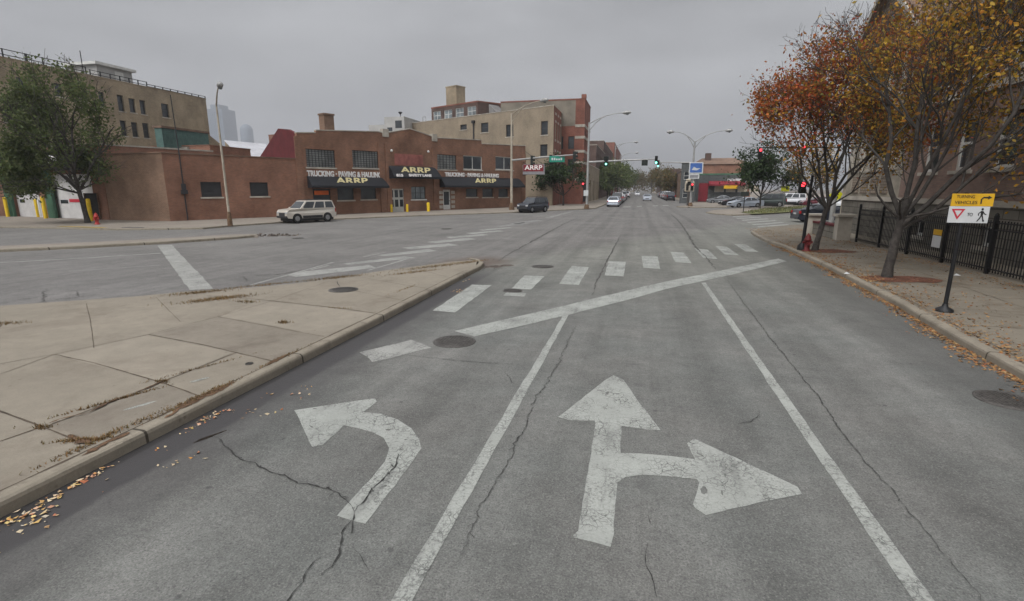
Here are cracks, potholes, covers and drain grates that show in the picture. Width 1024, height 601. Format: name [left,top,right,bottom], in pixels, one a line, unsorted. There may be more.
manhole cover [972,390,1024,411]
manhole cover [433,335,476,348]
crack [460,328,575,556]
crack [214,436,399,601]
crack [728,281,981,600]
